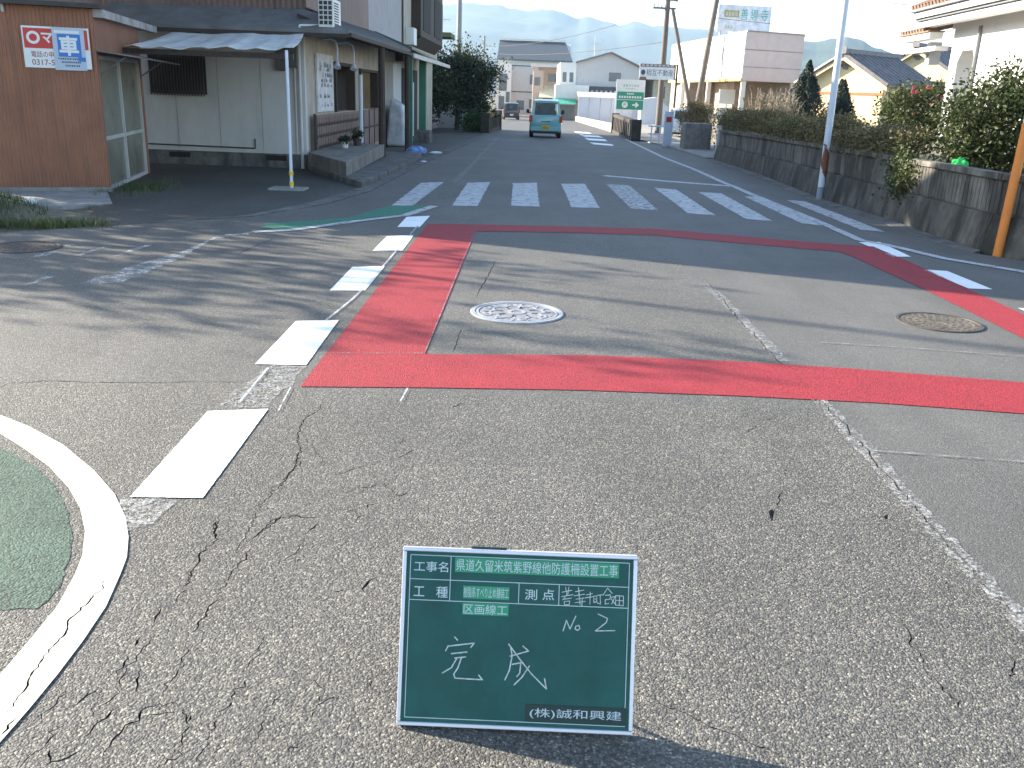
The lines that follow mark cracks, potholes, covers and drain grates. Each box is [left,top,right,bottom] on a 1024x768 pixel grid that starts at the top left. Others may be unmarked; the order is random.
crack [899,581,1016,710]
crack [0,397,417,767]
manhole cover [470,301,564,324]
manhole cover [0,241,63,253]
manhole cover [894,312,985,333]
